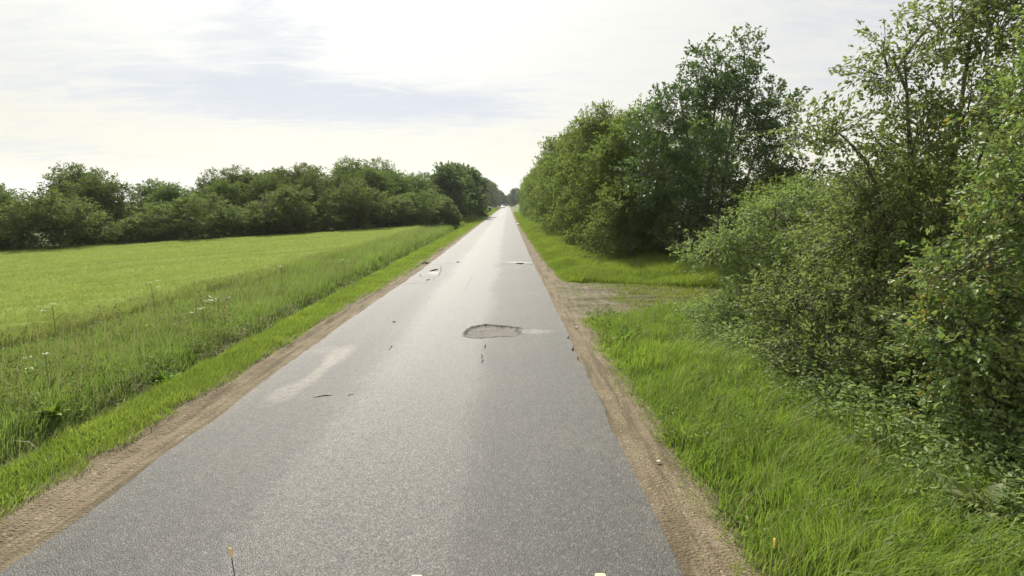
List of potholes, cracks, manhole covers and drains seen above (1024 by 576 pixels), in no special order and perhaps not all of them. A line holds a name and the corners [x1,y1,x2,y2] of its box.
pothole [462,324,523,339]
